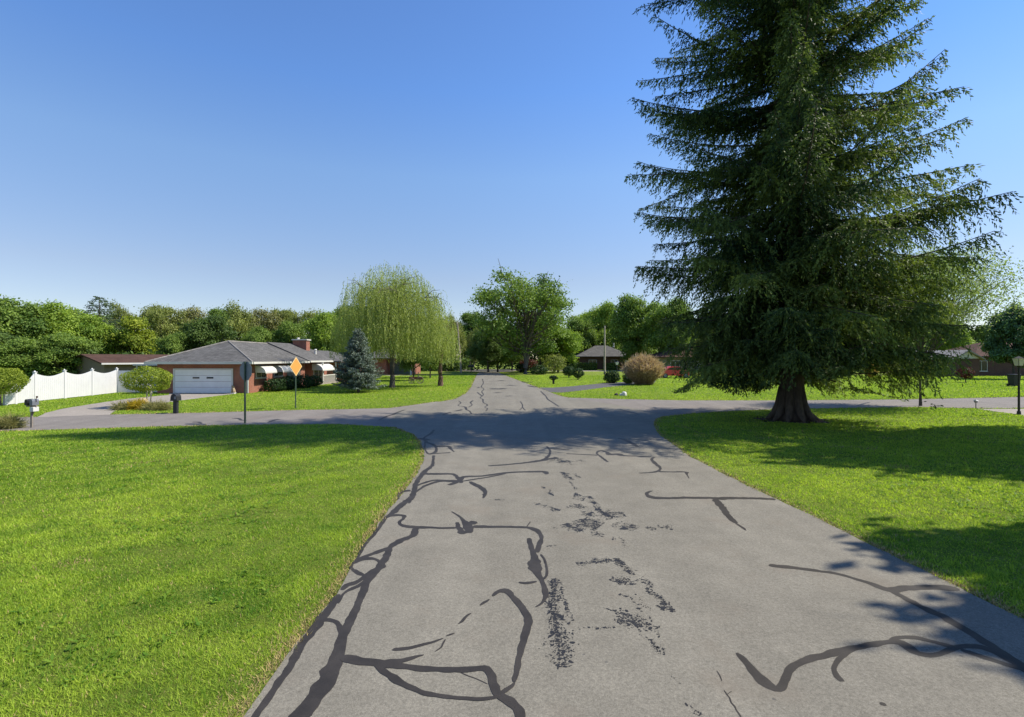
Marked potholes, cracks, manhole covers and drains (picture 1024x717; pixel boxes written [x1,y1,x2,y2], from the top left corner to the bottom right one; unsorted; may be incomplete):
crack [251,455,673,717]
